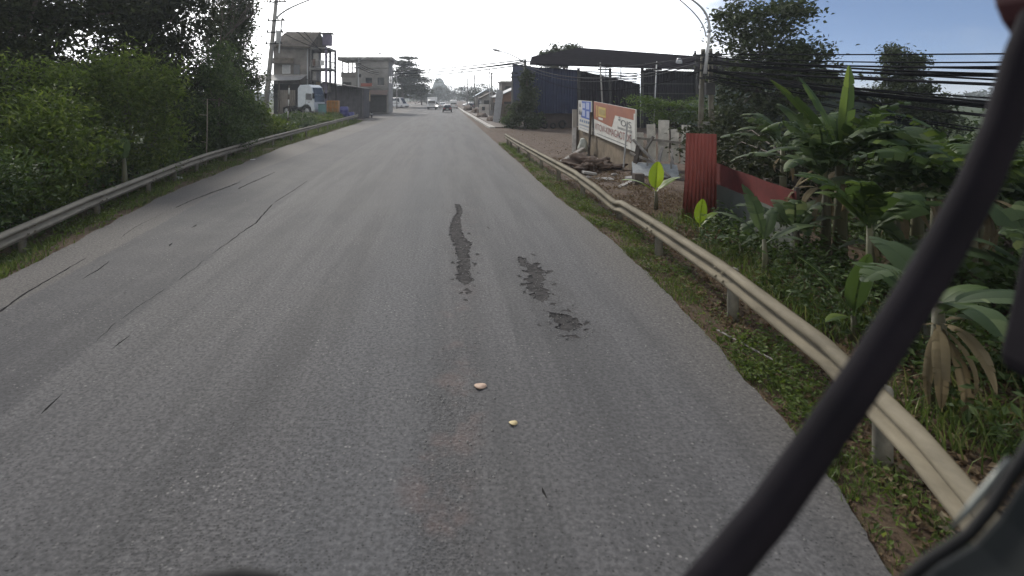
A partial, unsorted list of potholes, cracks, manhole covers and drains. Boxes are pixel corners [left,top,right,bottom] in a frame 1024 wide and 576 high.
pothole [448,204,489,301]
pothole [538,309,590,341]
pothole [516,253,557,306]
